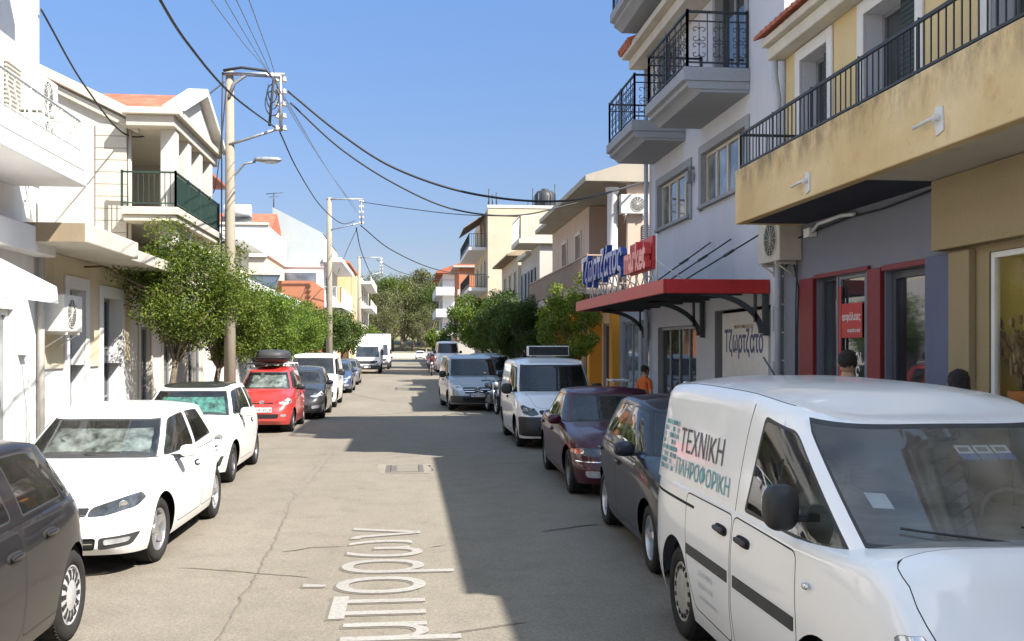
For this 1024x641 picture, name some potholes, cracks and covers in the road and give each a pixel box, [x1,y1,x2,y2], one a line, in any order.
crack [541,524,596,532]
manhole cover [377,463,433,474]
